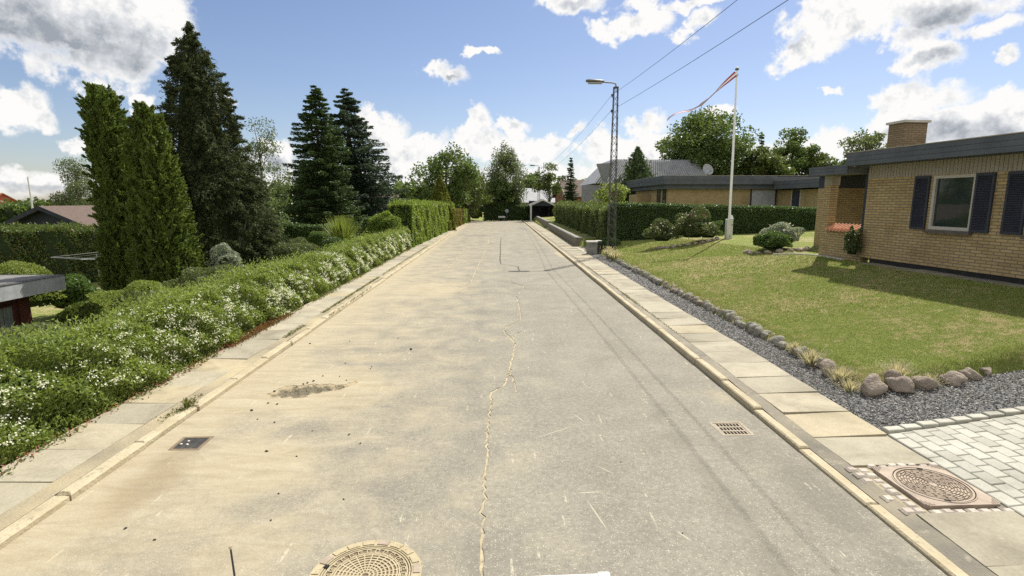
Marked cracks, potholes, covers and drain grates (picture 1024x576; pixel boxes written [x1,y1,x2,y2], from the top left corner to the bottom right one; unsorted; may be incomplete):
crack [443,239,526,576]
drain grate [709,421,755,436]
drain grate [168,436,214,450]
pothole [266,381,358,399]
manhole cover [873,465,1000,511]
manhole cover [309,540,422,576]
